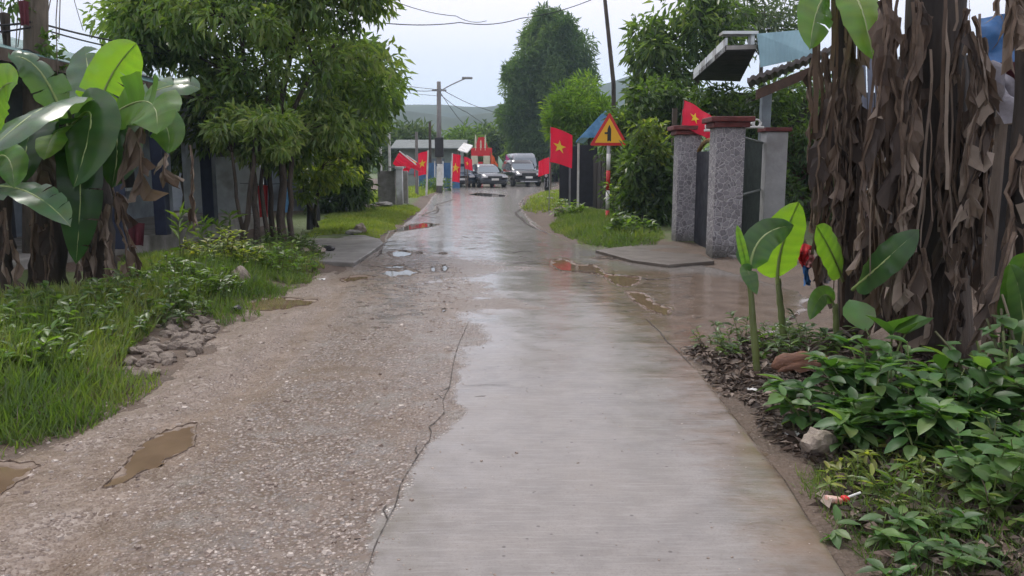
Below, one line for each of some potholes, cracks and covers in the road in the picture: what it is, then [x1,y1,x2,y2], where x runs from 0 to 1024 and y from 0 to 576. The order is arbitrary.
pothole [339,274,376,283]
crack [365,321,497,573]
pothole [379,267,421,277]
pothole [97,422,200,489]
pothole [0,459,43,500]
pothole [242,297,321,312]
pothole [624,291,672,315]
pothole [550,259,642,287]
pothole [390,222,440,232]
